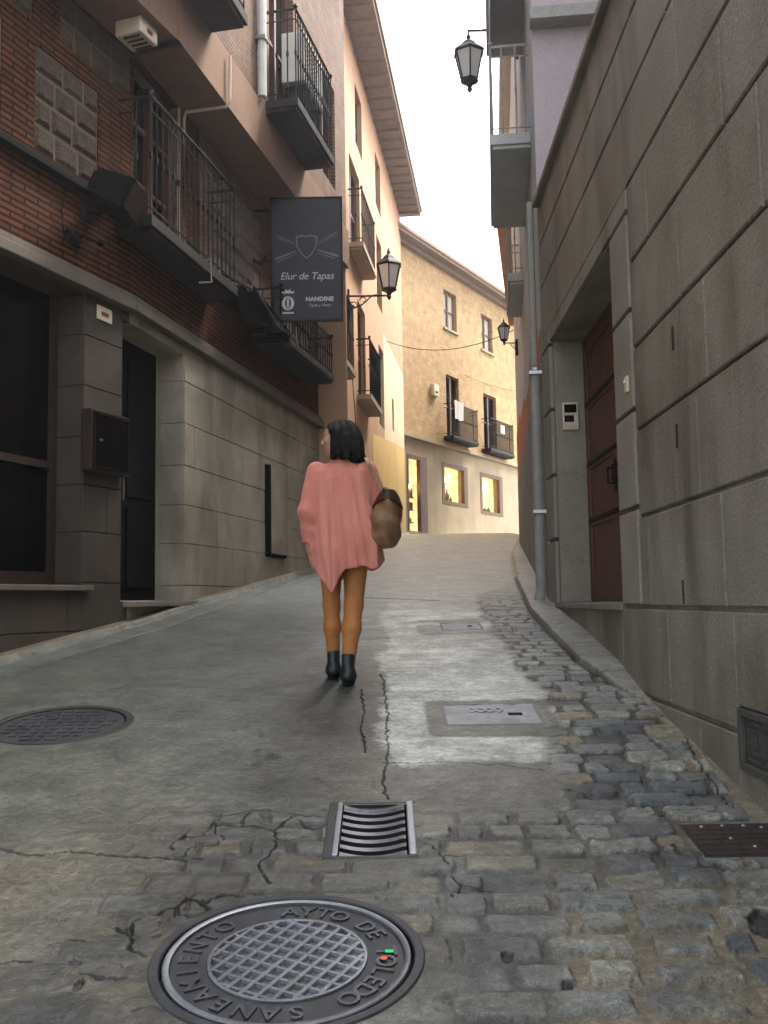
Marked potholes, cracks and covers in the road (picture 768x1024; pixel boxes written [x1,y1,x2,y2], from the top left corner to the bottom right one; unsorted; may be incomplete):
manhole cover [0,705,134,745]
crack [0,847,205,862]
manhole cover [441,703,546,726]
manhole cover [147,894,425,1024]
crack [79,891,263,981]
manhole cover [439,622,484,631]
drain grate [322,801,420,860]
crack [360,689,546,771]
pothole [742,907,768,939]
crack [0,939,88,965]
